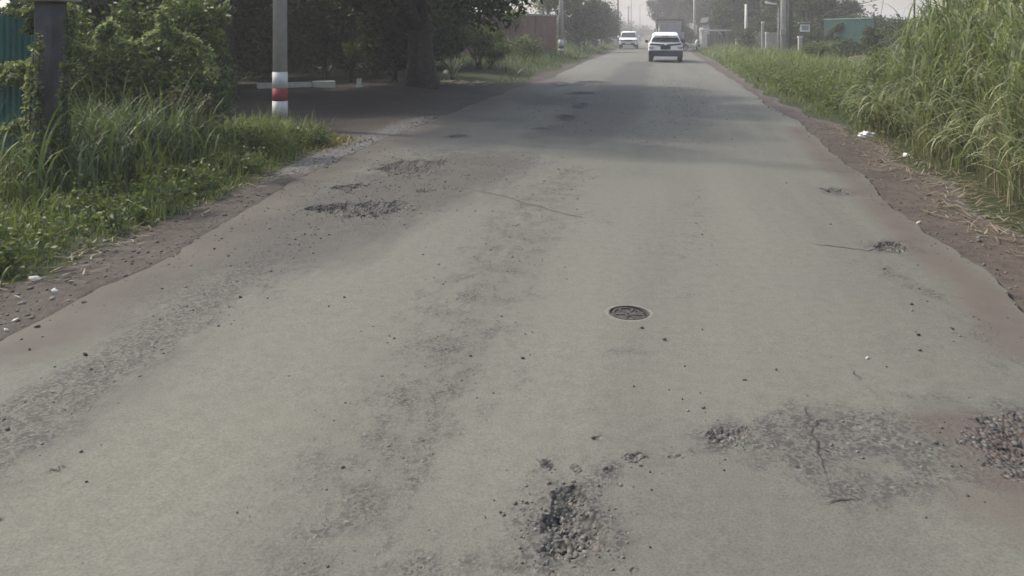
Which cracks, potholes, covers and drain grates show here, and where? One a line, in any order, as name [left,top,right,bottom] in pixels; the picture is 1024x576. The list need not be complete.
crack [476,190,578,216]
pothole [527,485,606,566]
pothole [374,159,455,179]
pothole [705,426,749,447]
manhole cover [605,305,653,321]
pothole [621,451,649,463]
crack [804,405,832,473]
pothole [304,200,417,219]
pothole [954,410,1024,483]
pothole [823,187,853,195]
pothole [873,241,915,254]
pothole [328,183,371,193]
